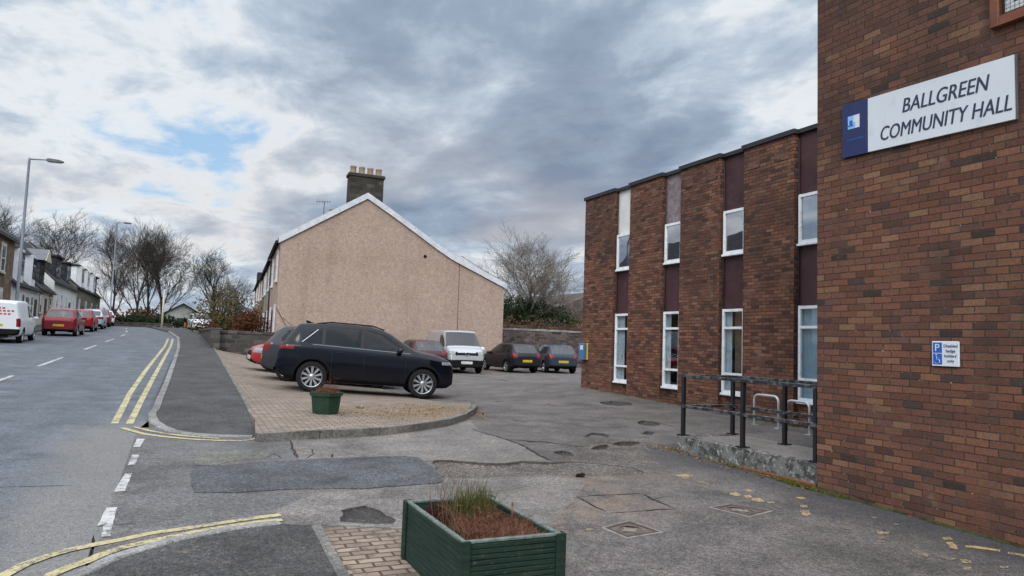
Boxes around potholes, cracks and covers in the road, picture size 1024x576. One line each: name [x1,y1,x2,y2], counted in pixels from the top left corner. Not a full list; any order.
crack [473,420,586,461]
crack [274,441,314,459]
pothole [340,506,396,524]
manhole cover [602,520,662,538]
manhole cover [710,504,771,517]
